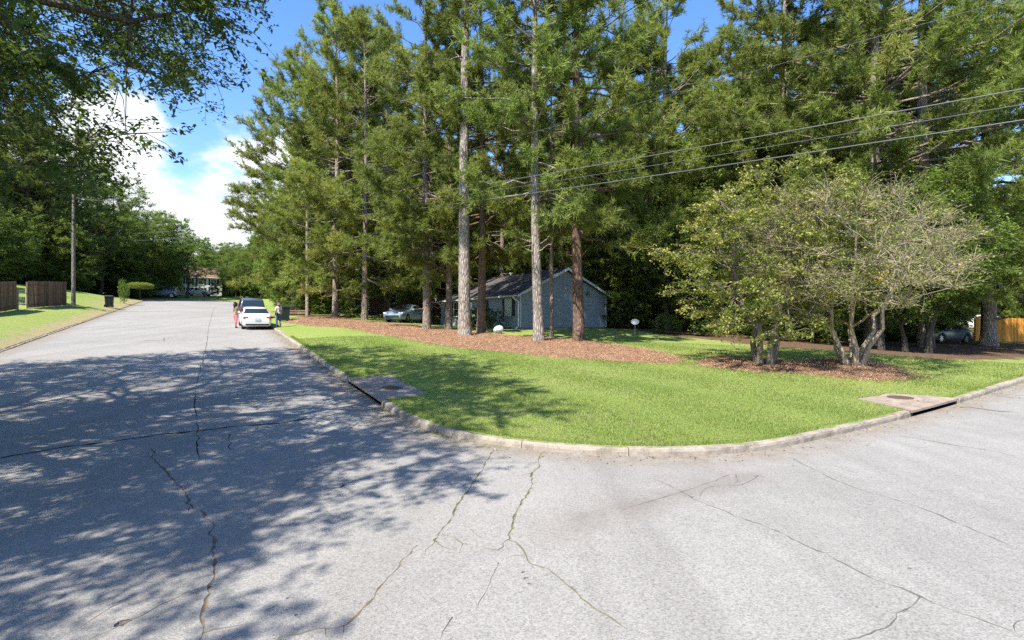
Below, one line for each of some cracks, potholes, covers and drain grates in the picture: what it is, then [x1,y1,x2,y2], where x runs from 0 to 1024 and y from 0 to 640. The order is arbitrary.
drain grate [858,393,959,417]
crack [628,473,1023,640]
crack [794,459,1022,550]
crack [0,307,339,640]
crack [277,449,631,640]
drain grate [347,375,427,406]
